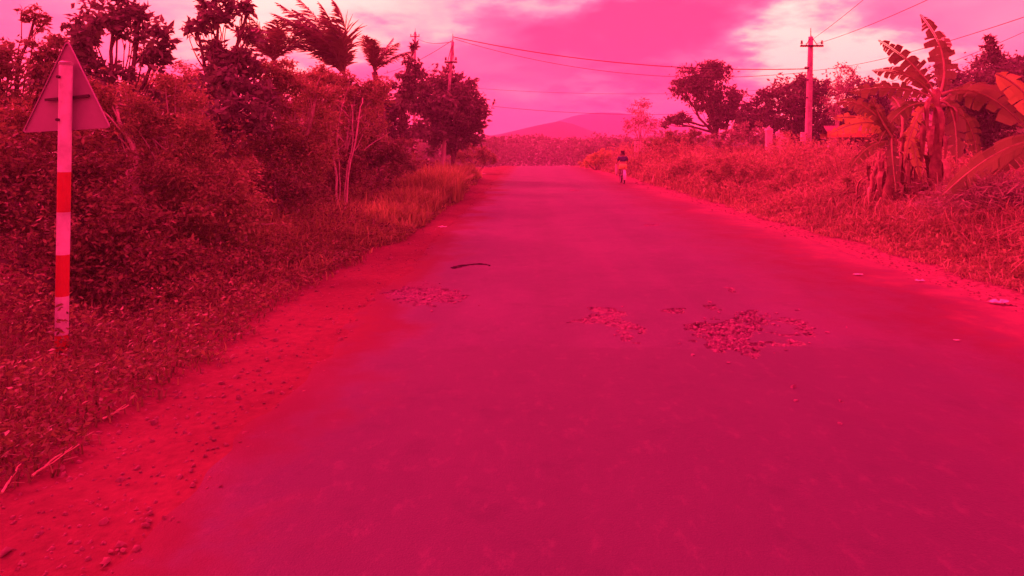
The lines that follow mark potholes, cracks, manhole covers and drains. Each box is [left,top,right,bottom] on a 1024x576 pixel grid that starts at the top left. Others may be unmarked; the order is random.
pothole [660,301,787,356]
pothole [709,308,811,344]
pothole [566,306,647,344]
pothole [379,281,481,312]
pothole [727,342,766,364]
